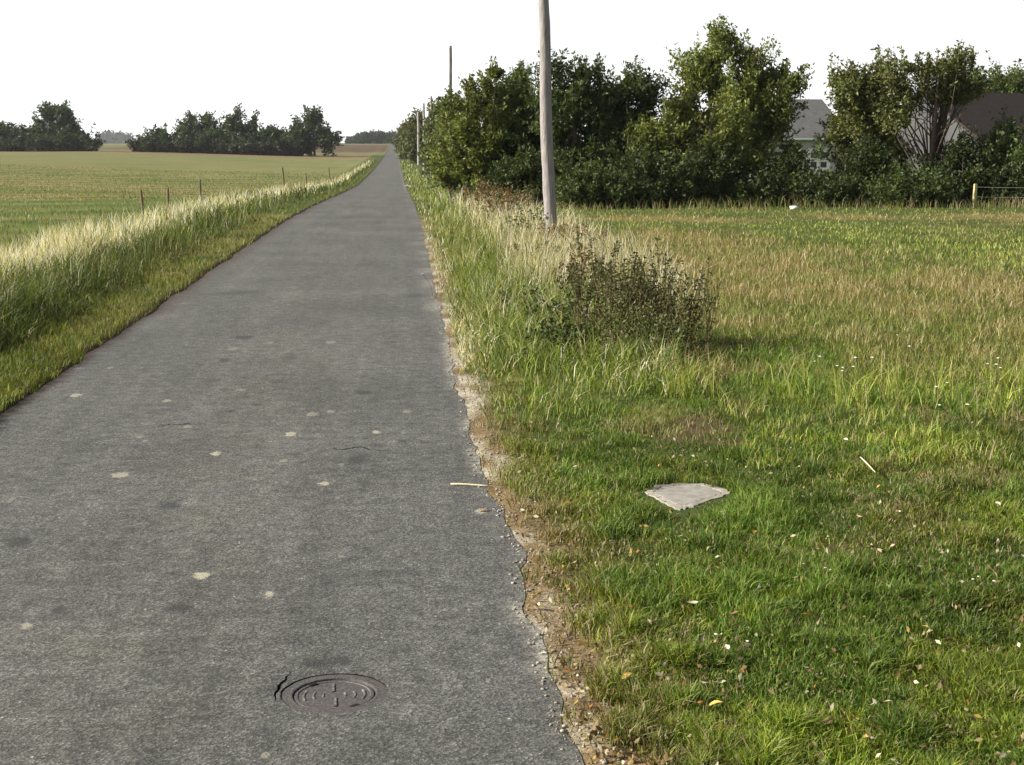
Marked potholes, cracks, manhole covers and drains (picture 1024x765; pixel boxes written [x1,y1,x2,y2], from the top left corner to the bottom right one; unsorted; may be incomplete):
manhole cover [280,674,387,714]
crack [274,672,292,701]
